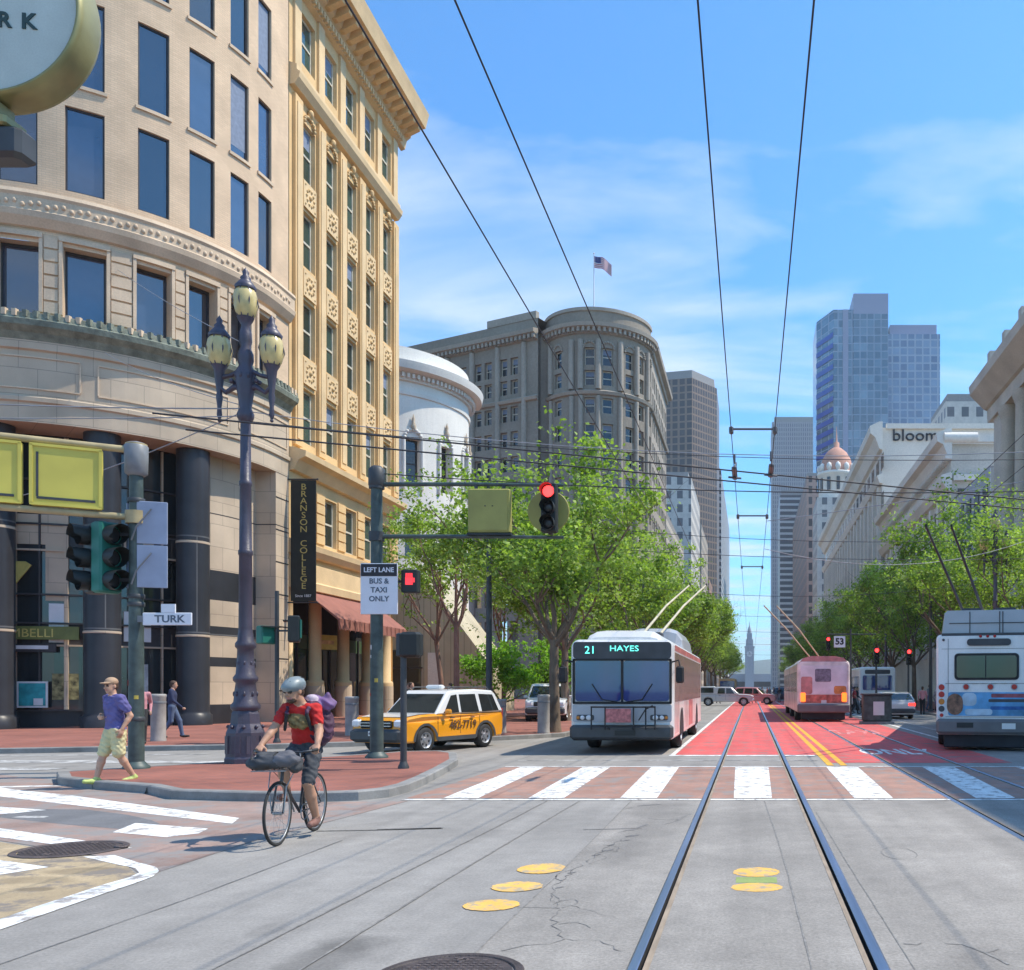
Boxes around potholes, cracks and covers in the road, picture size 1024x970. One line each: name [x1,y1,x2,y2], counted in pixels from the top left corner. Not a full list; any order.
crack [946,943,1009,964]
manhole cover [382,953,524,970]
manhole cover [8,840,130,858]
crack [501,804,690,952]
